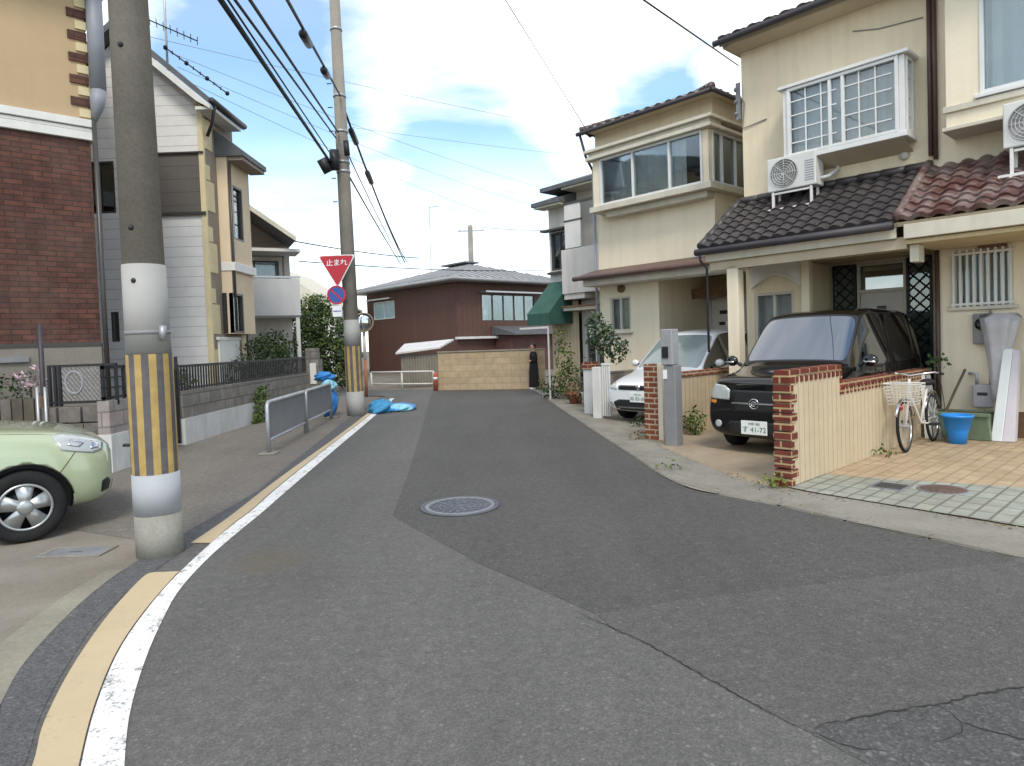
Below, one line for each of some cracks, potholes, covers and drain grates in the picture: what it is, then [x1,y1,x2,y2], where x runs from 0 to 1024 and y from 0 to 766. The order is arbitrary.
manhole cover [916,484,970,495]
manhole cover [420,496,500,517]
crack [811,686,1024,750]
